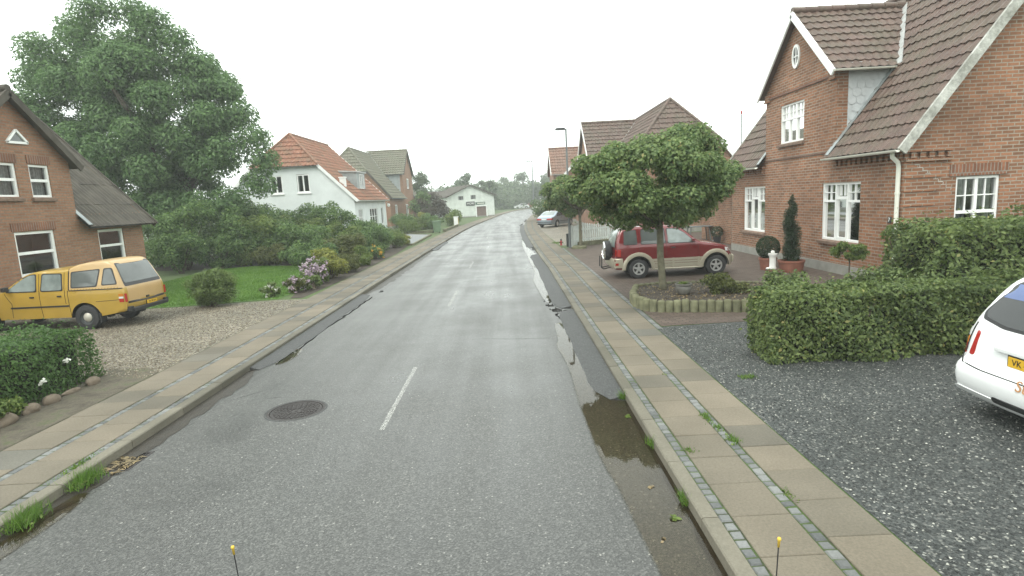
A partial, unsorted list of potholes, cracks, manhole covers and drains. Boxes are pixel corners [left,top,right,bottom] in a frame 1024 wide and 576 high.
manhole cover [264,400,328,422]
